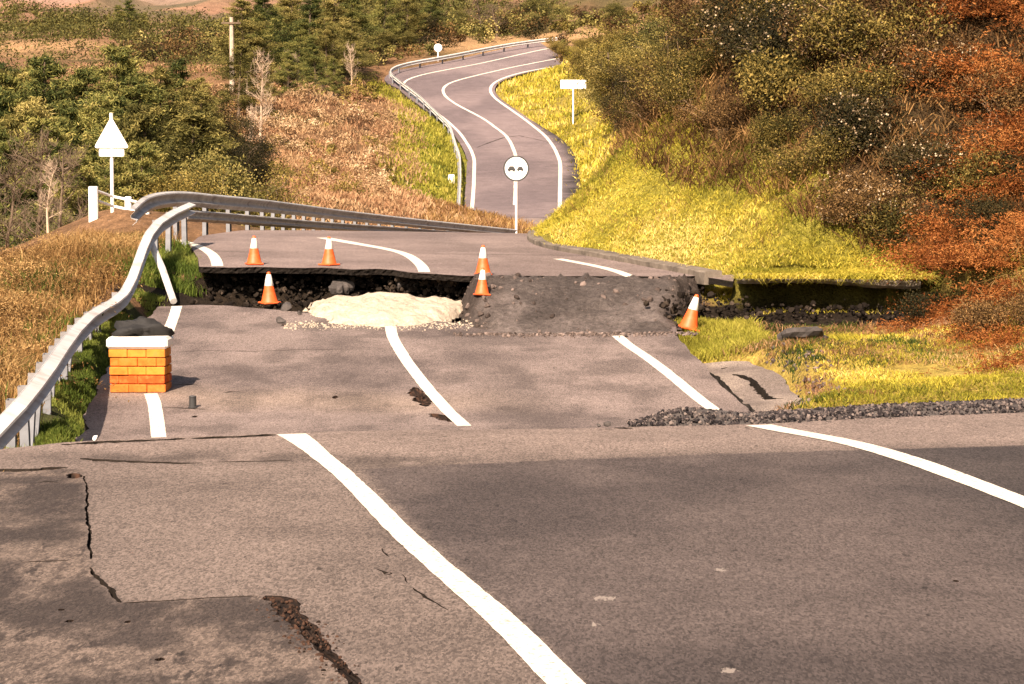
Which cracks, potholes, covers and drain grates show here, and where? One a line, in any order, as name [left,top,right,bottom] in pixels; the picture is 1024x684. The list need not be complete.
crack [377,549,448,610]
crack [0,434,289,603]
pothole [429,414,452,422]
pothole [407,387,432,407]
crack [721,367,784,400]
